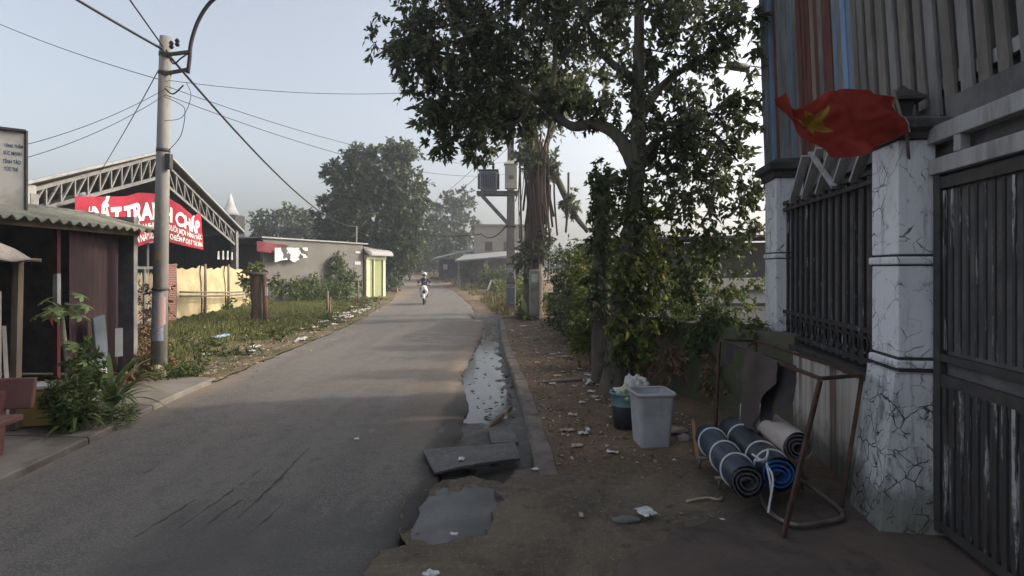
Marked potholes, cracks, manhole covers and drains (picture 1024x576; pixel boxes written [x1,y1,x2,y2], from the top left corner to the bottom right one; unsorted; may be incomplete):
pothole [399,476,503,546]
crack [135,449,308,537]
